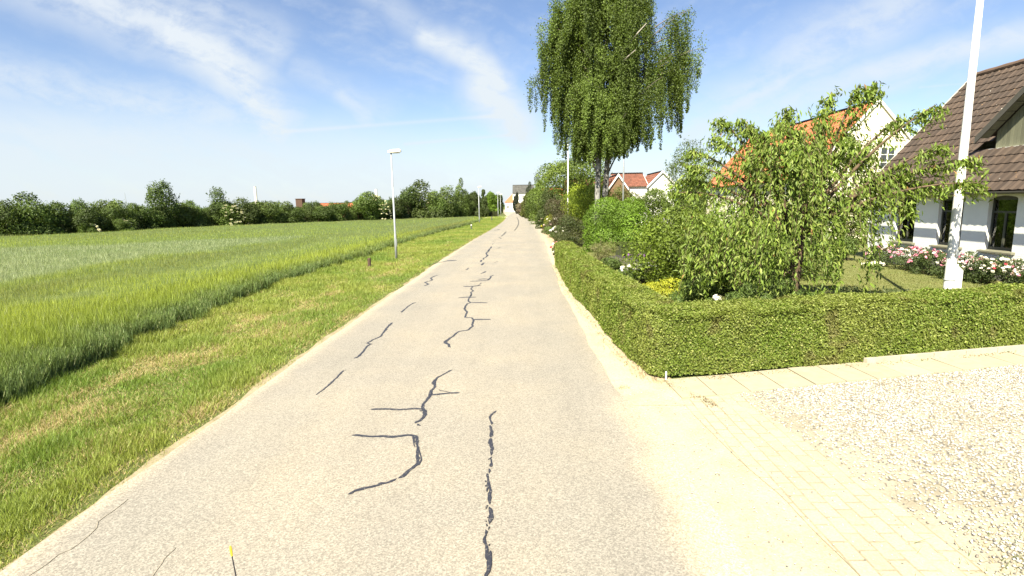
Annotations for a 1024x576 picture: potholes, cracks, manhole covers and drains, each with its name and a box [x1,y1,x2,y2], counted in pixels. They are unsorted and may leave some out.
crack [29,499,128,576]
